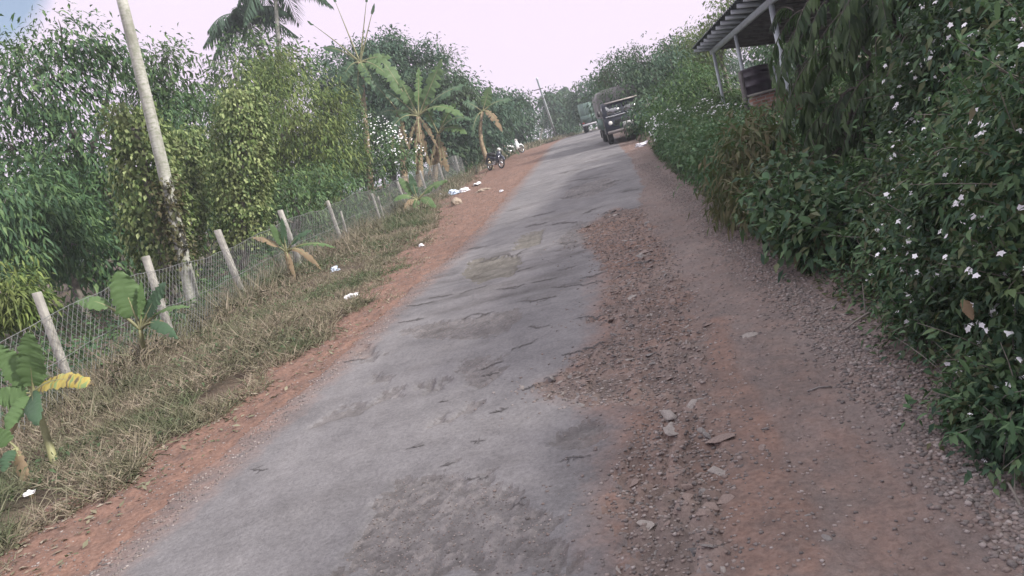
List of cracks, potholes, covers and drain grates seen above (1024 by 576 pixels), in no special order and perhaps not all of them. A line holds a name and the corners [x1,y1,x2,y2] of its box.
pothole [417,375,454,396]
crack [524,341,604,389]
crack [482,325,548,376]
crack [398,245,608,323]
